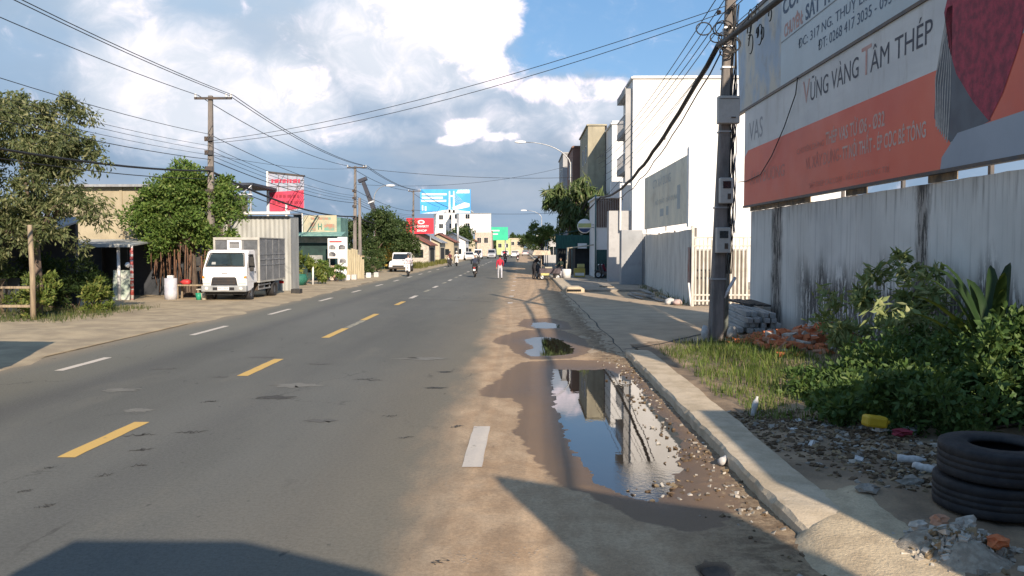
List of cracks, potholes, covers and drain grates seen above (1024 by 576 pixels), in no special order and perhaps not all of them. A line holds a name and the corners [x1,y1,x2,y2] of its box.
pothole [551,369,684,502]
pothole [525,337,575,356]
